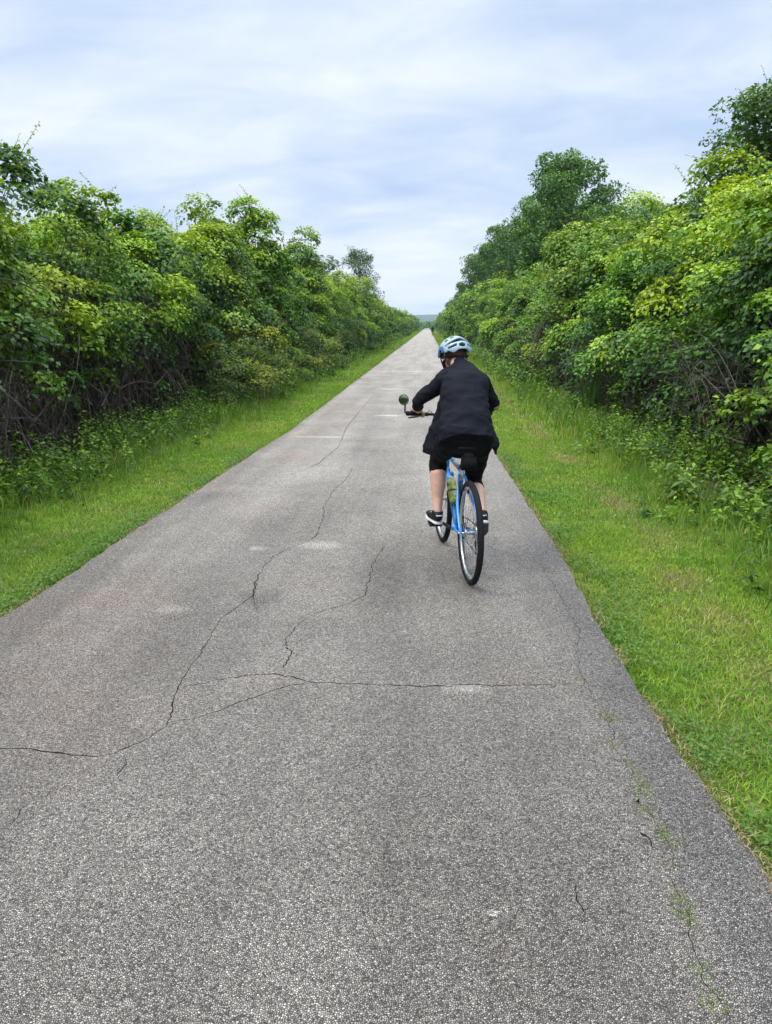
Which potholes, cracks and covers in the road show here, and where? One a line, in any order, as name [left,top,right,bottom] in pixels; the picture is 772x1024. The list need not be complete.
crack [549,578,733,1022]
crack [2,469,550,782]
